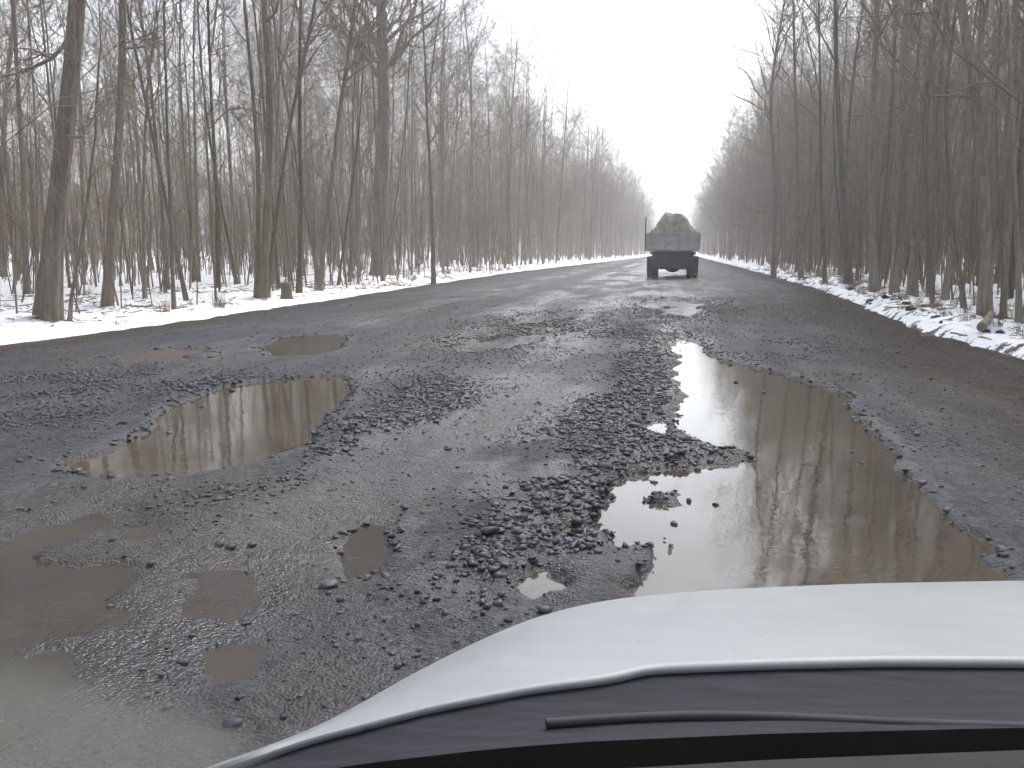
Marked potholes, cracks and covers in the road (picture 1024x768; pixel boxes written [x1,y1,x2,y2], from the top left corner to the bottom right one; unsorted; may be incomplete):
pothole [0,475,424,748]
pothole [29,370,369,481]
pothole [627,296,721,318]
pothole [51,345,226,369]
pothole [405,329,1024,627]
pothole [245,333,359,358]
